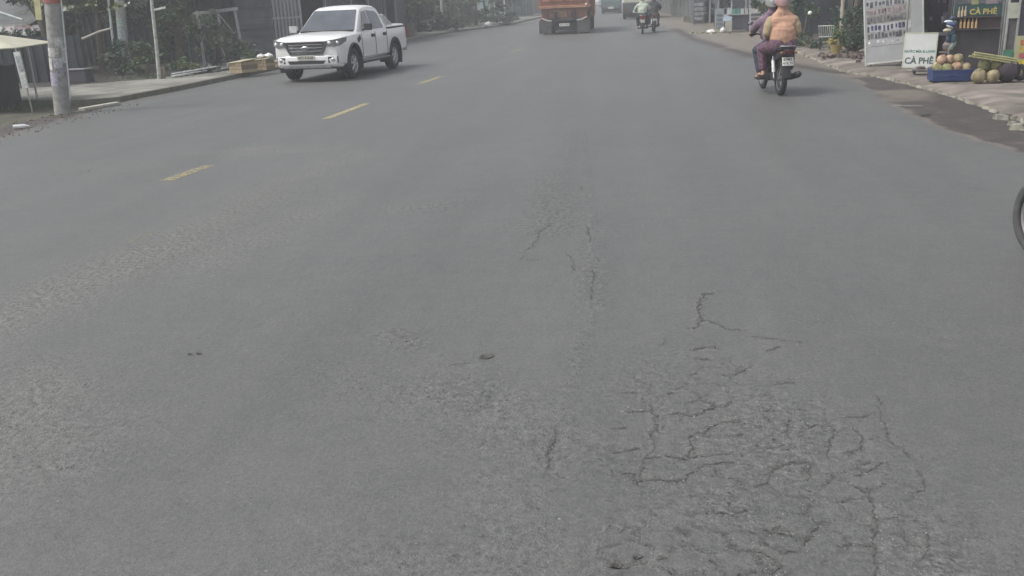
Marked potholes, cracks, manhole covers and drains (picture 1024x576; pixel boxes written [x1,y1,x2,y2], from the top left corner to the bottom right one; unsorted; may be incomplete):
crack [545,427,561,478]
crack [609,358,930,576]
crack [691,292,802,375]
crack [567,186,599,299]
